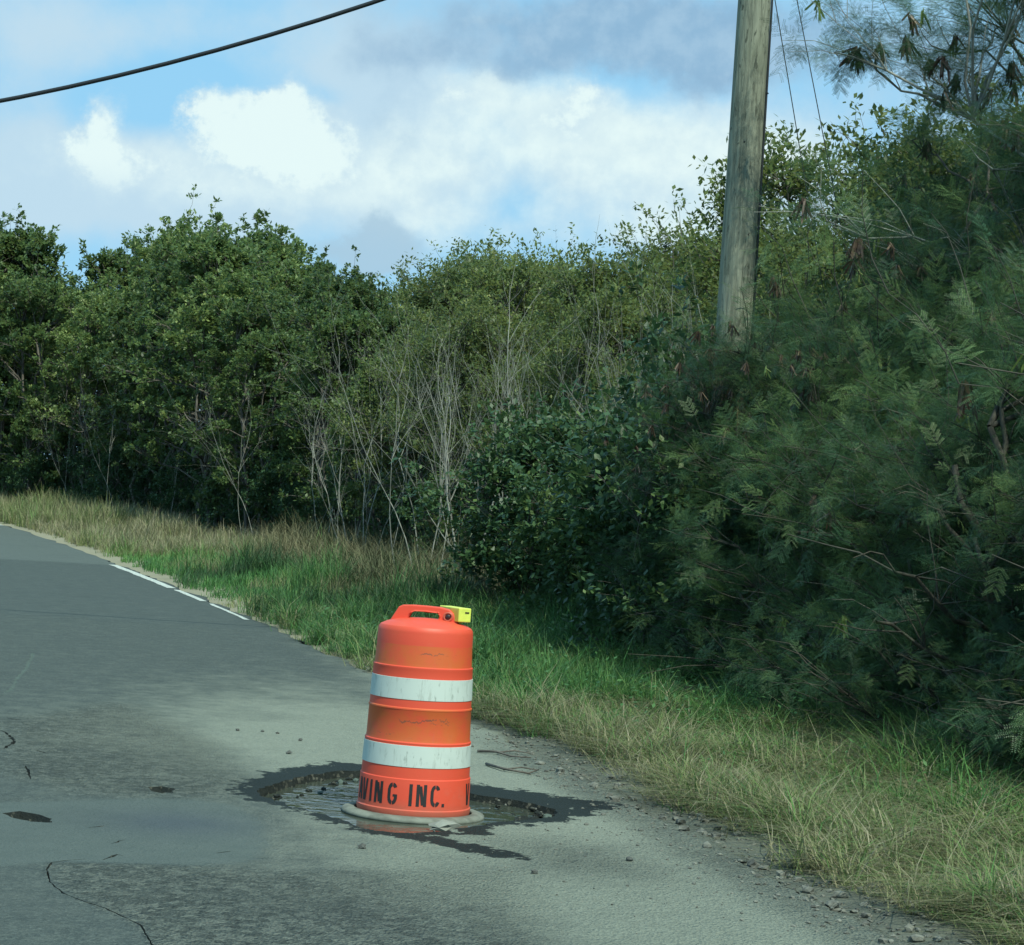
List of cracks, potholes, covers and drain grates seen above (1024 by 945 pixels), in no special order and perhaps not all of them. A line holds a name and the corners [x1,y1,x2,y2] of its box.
crack [0,718,17,748]
crack [46,859,153,945]
pothole [257,771,558,825]
pothole [3,811,52,823]
